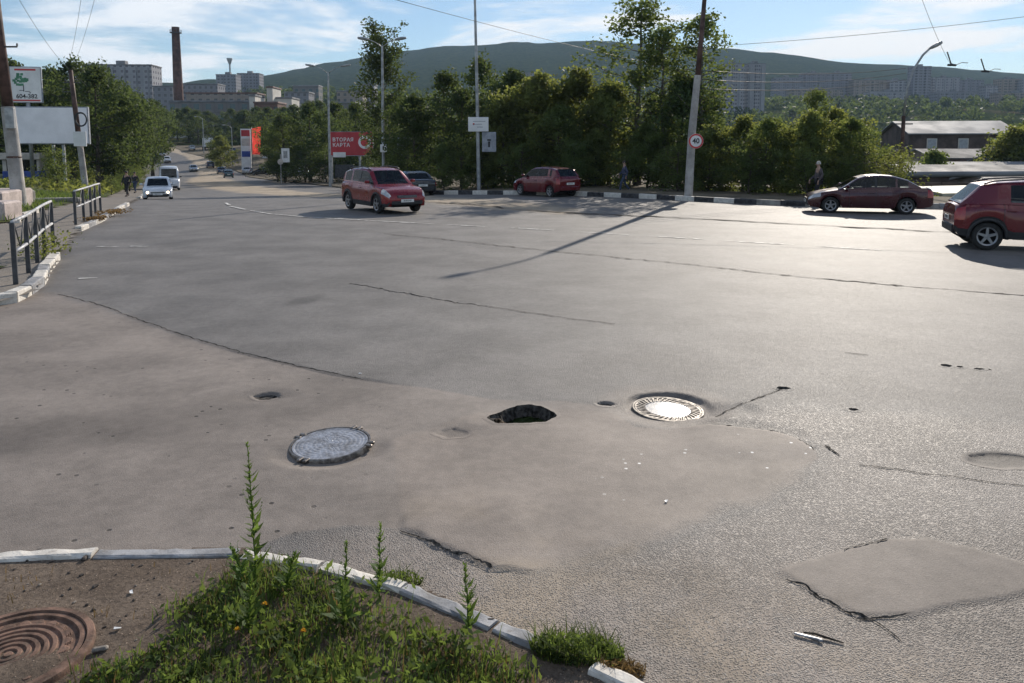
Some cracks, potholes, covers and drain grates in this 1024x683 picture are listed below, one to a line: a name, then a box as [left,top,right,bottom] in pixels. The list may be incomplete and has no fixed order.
crack [715,389,840,455]
manhole cover [0,607,96,683]
crack [400,530,492,568]
crack [859,464,1024,486]
pothole [248,391,285,401]
pothole [430,426,474,439]
pothole [592,400,620,408]
pothole [483,403,561,425]
manhole cover [288,425,375,464]
